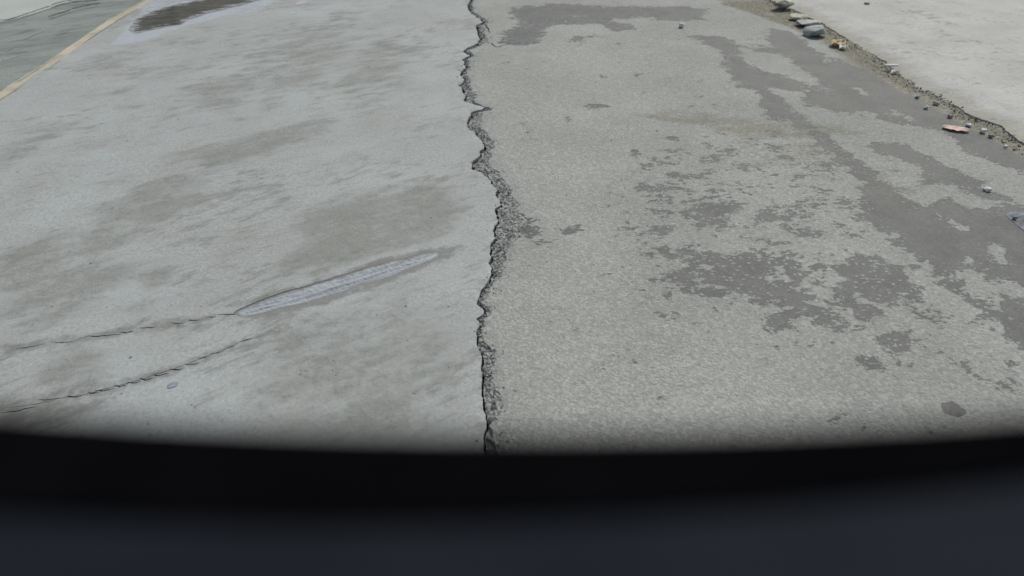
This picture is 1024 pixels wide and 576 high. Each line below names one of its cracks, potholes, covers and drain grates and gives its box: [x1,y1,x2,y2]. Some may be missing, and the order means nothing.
crack [457,0,540,433]
